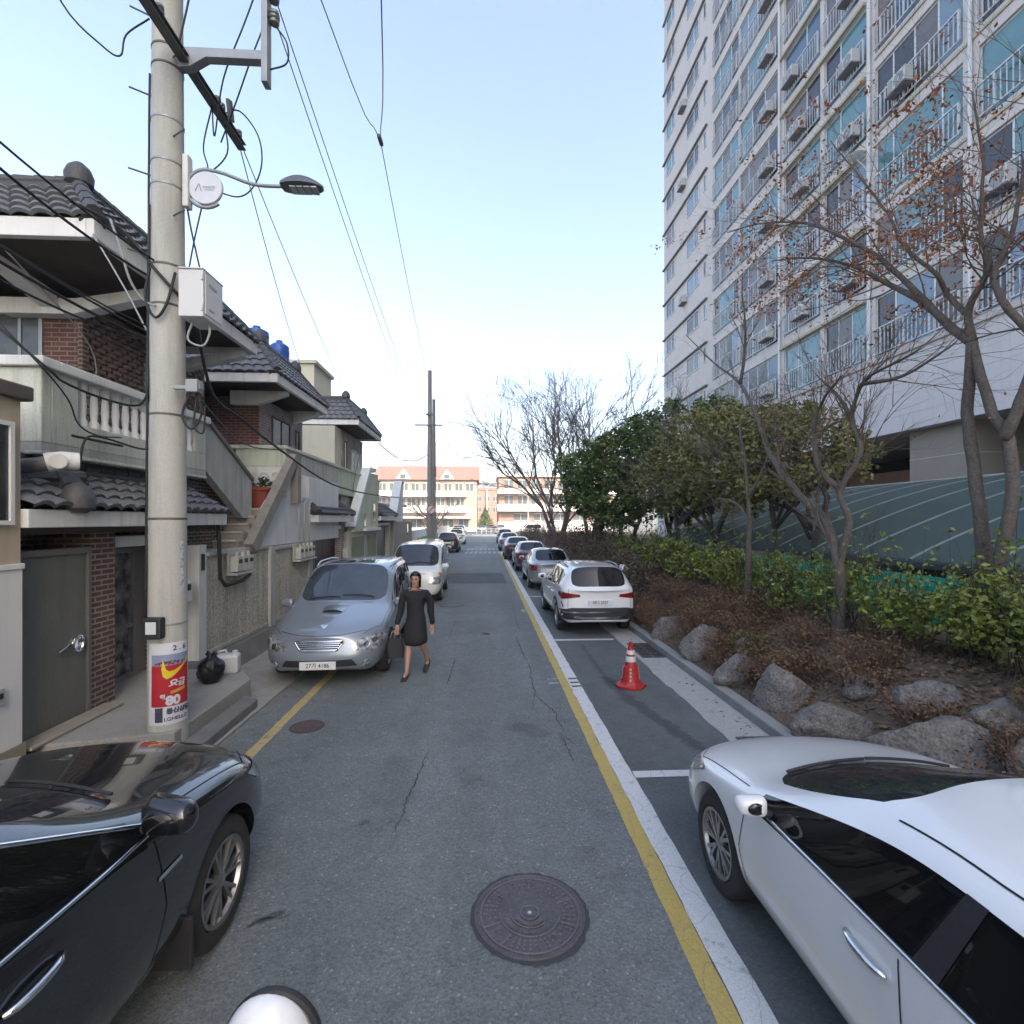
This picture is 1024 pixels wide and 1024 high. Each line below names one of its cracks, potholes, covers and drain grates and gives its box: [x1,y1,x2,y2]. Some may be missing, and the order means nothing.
manhole cover [470,873,590,967]
crack [515,619,575,759]
drain grate [627,643,666,658]
manhole cover [289,720,325,733]
crack [395,760,424,838]
